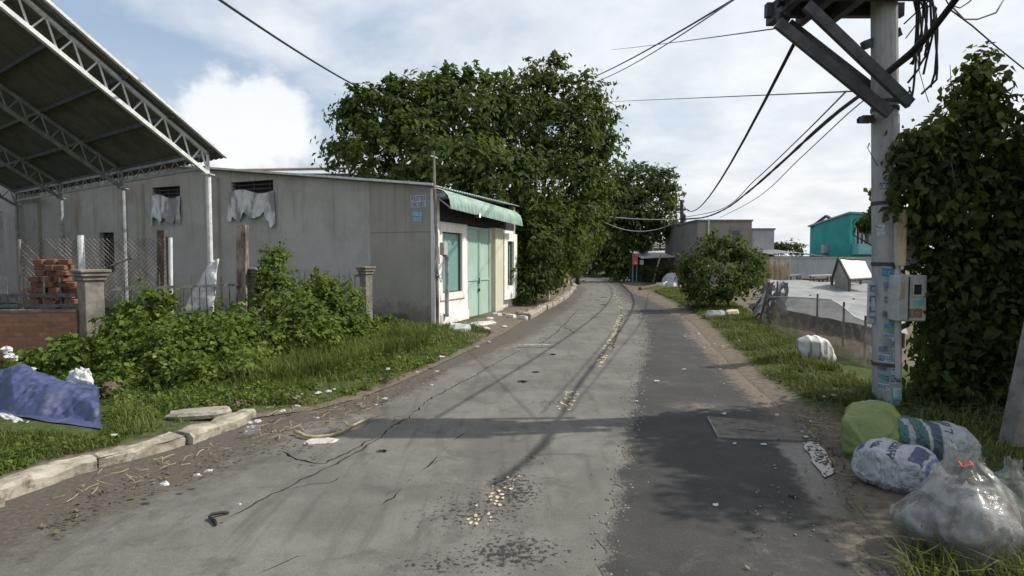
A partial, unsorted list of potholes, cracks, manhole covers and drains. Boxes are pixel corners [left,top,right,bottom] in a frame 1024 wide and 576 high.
crack [226,309,579,519]
manhole cover [707,416,819,441]
